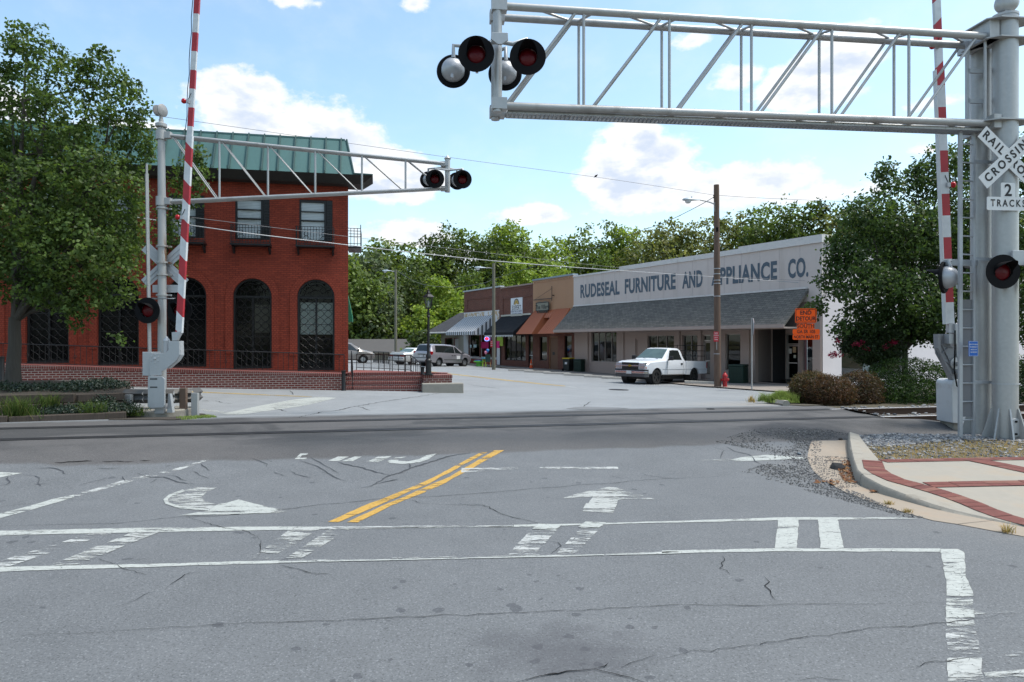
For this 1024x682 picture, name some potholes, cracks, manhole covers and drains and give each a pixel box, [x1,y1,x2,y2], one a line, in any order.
crack [35,577,944,635]
crack [662,613,1016,659]
crack [518,656,650,682]
